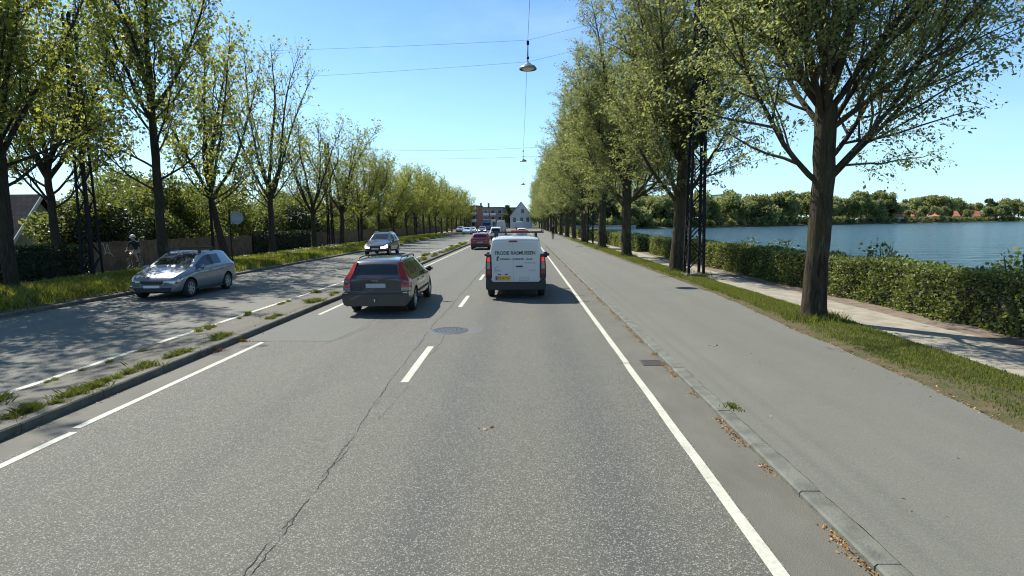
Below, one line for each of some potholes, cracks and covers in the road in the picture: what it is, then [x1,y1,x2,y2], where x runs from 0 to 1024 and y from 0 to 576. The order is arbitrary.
manhole cover [427,327,484,335]
crack [244,270,483,576]
